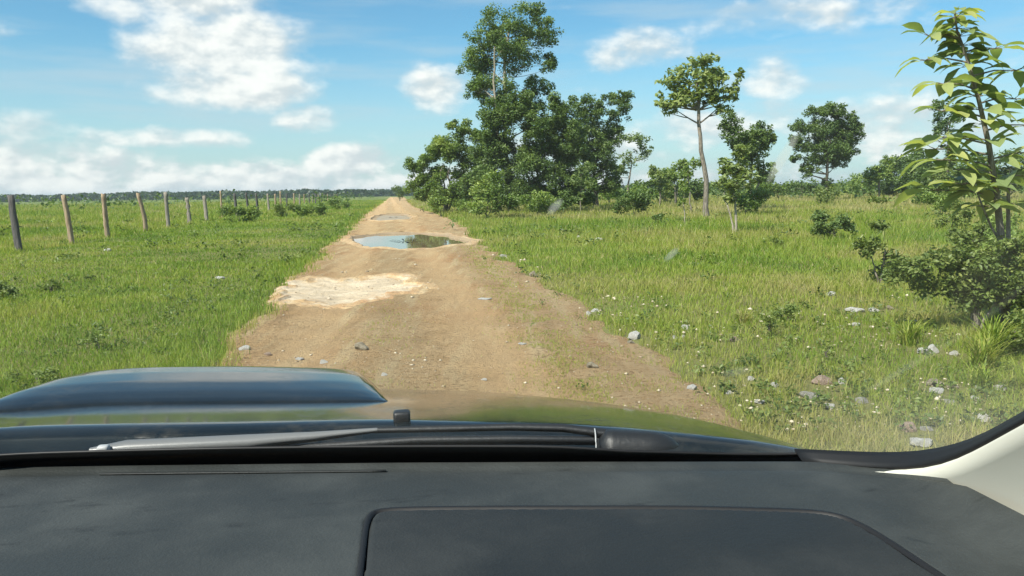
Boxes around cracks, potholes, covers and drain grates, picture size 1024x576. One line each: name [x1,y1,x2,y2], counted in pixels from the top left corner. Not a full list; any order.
pothole [366,213,417,221]
pothole [336,231,483,250]
